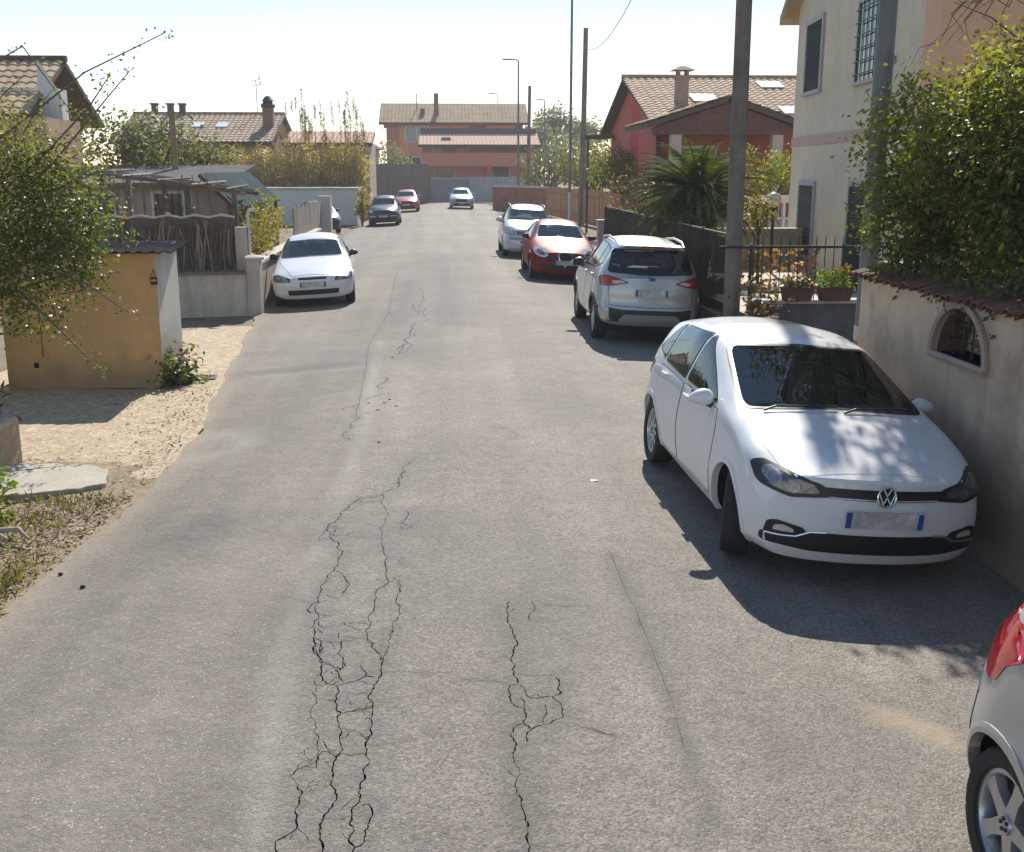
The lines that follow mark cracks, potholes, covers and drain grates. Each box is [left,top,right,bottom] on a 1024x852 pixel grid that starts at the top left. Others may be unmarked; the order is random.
crack [274,460,616,852]
